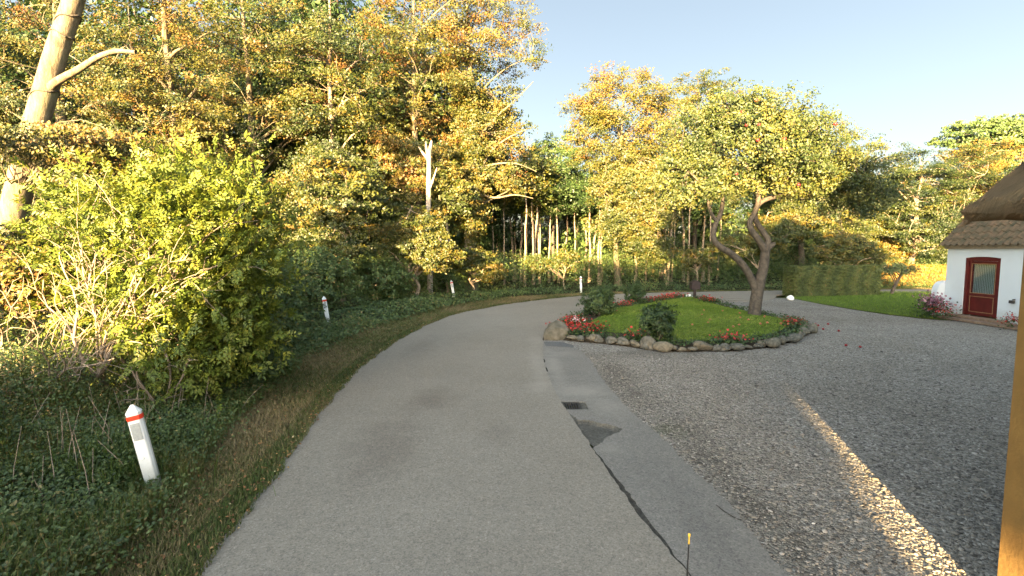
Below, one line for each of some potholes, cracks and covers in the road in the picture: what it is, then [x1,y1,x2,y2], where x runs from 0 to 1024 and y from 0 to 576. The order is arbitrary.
crack [591,447,691,576]
pothole [571,415,622,447]
